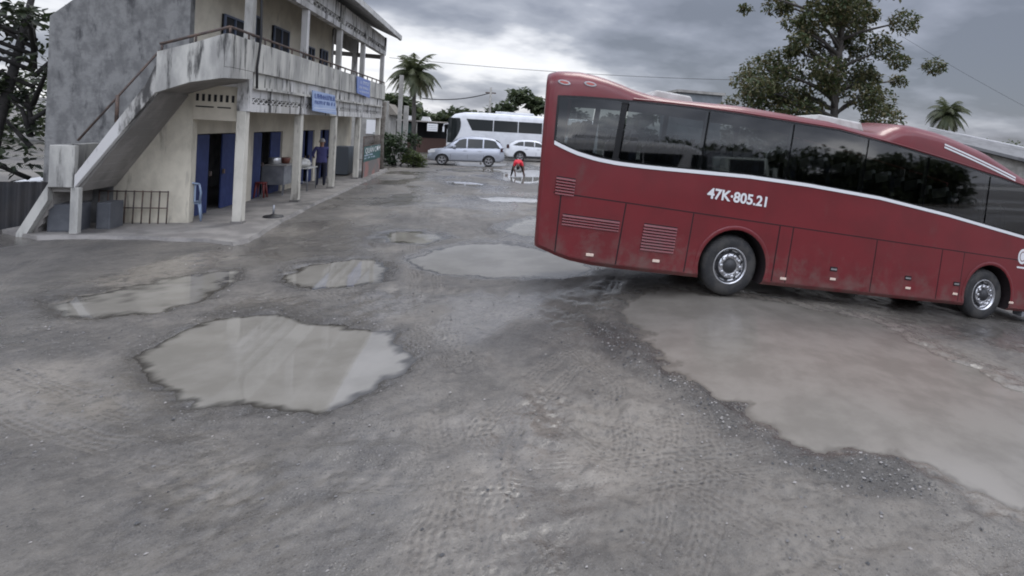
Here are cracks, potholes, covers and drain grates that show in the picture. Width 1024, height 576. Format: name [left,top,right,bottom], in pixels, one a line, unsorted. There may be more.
pothole [611,283,1024,523]
pothole [398,240,606,280]
pothole [369,228,455,245]
pothole [494,215,536,238]
pothole [118,304,437,421]
pothole [269,255,401,291]
pothole [33,264,257,322]
pothole [466,195,537,203]
